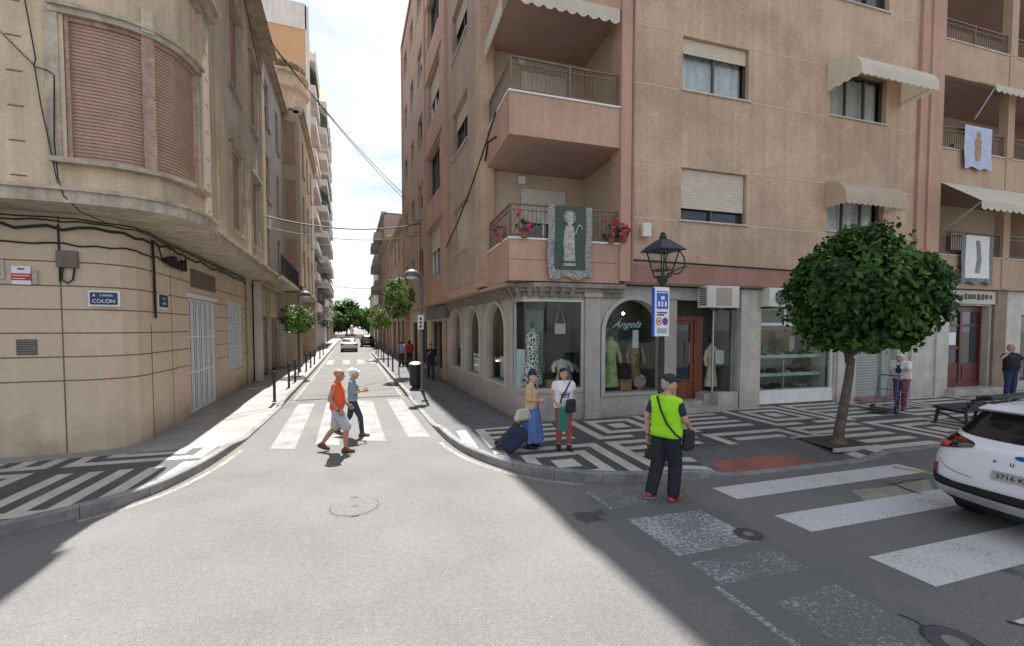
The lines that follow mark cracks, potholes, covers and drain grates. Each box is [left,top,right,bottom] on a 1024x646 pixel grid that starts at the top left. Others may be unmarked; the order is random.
manhole cover [918,624,986,646]
manhole cover [733,528,764,541]
manhole cover [327,496,381,517]
crack [882,478,924,495]
